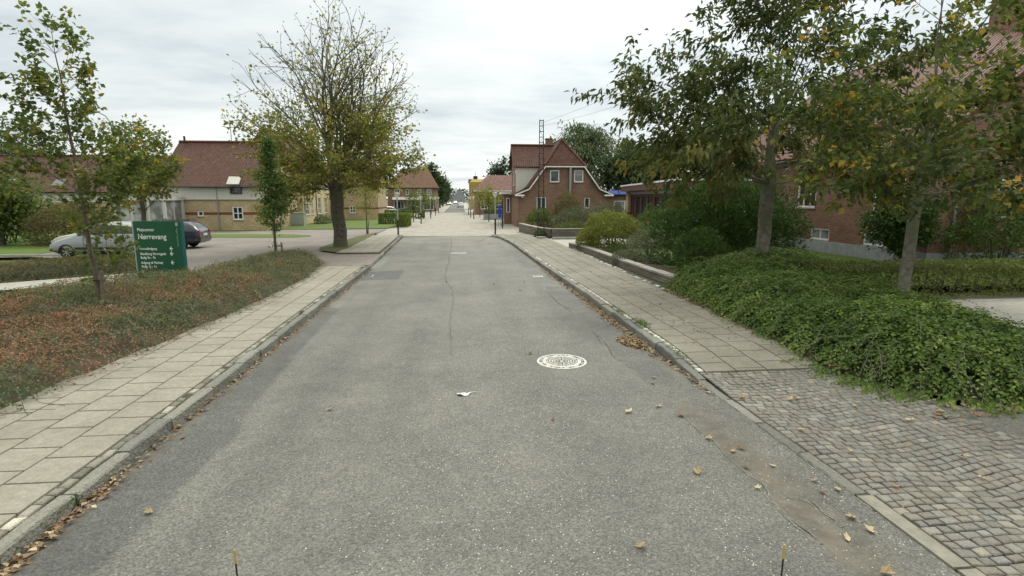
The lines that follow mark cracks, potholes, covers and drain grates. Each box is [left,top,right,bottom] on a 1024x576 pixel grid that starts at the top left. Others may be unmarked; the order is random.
manhole cover [537,354,587,369]
crack [592,332,630,367]
